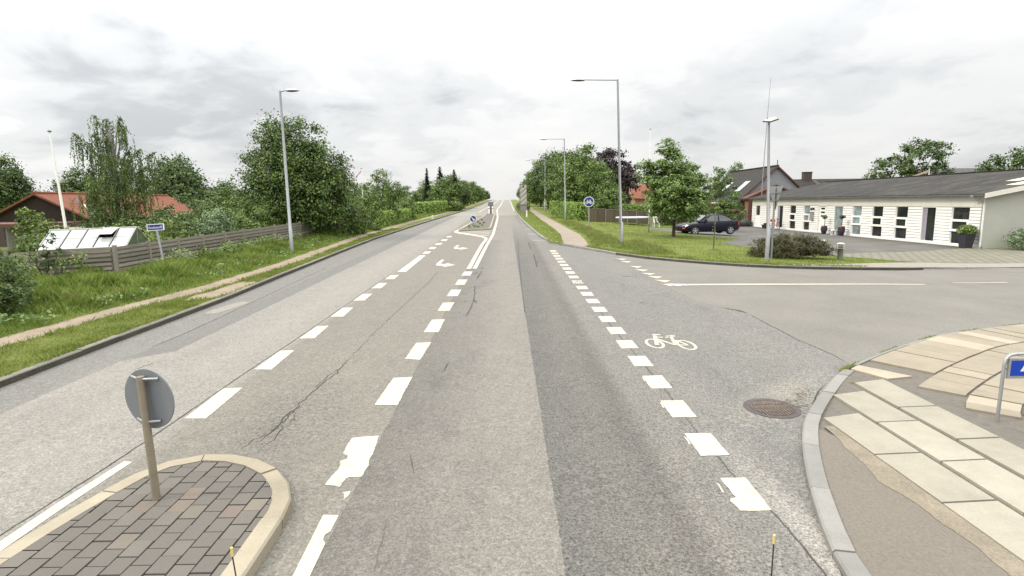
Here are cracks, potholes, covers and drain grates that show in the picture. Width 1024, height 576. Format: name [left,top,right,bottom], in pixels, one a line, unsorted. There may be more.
crack [245,273,437,447]
manhole cover [743,398,801,418]
